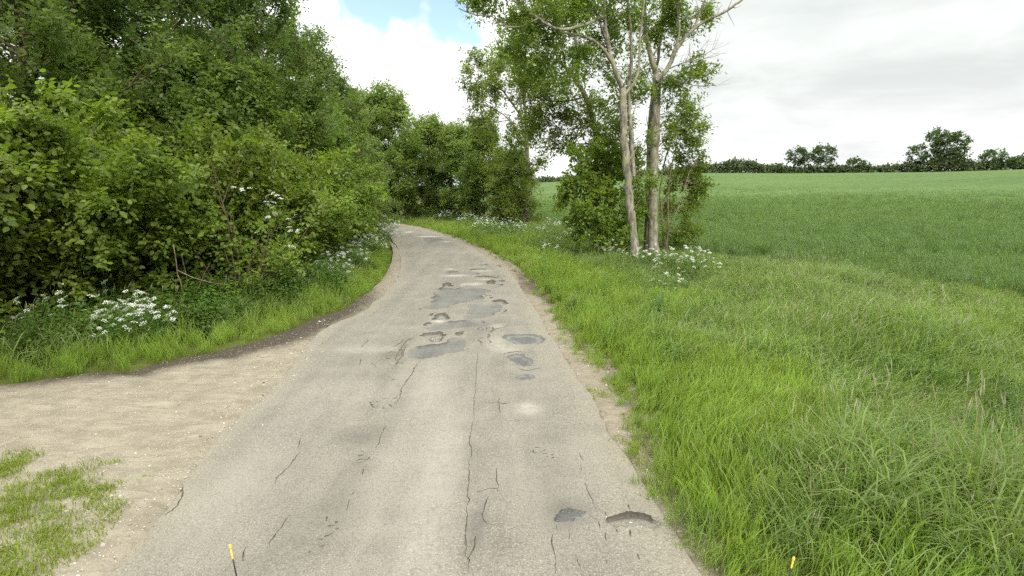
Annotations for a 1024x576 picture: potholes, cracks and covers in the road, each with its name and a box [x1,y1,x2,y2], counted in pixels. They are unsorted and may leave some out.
pothole [605,511,662,529]
crack [308,337,421,553]
pothole [506,353,534,367]
pothole [554,508,586,522]
pothole [419,331,448,343]
pothole [501,334,546,345]
crack [551,525,581,572]
crack [464,301,539,560]
